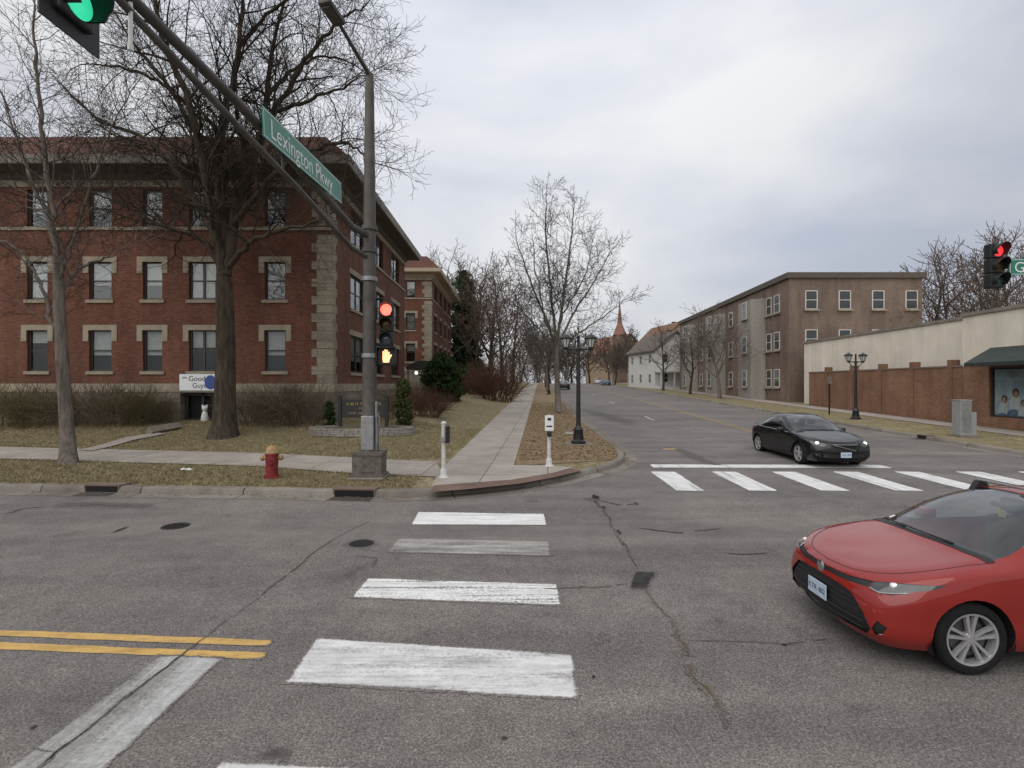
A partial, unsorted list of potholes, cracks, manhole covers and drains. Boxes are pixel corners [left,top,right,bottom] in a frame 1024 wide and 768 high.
crack [593,499,637,568]
drain grate [328,486,380,501]
drain grate [71,482,131,496]
manhole cover [349,539,374,547]
crack [644,588,826,729]
manhole cover [160,522,191,530]
